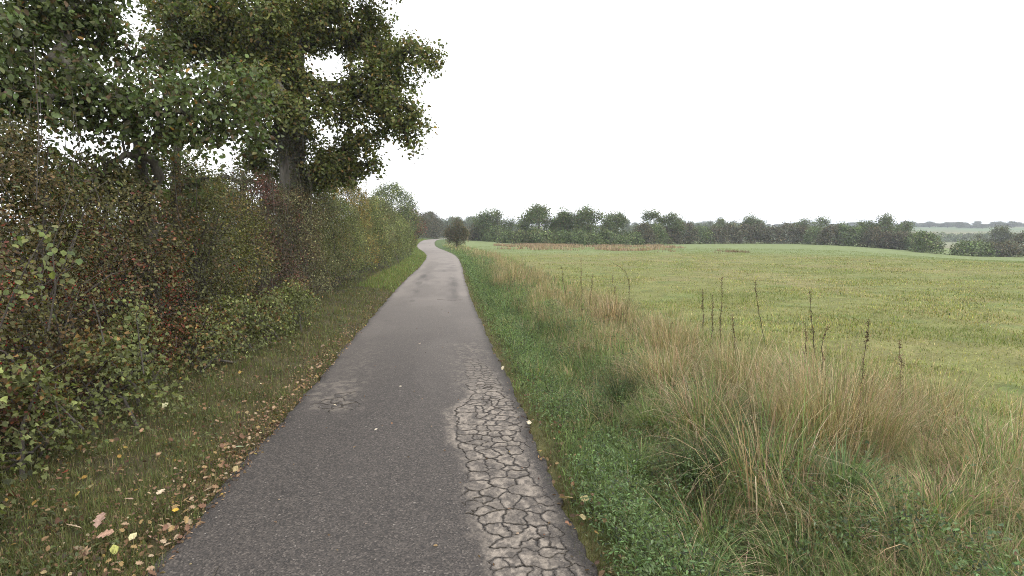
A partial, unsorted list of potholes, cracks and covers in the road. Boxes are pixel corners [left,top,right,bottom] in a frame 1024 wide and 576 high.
crack [316,391,360,411]
crack [454,359,594,576]
